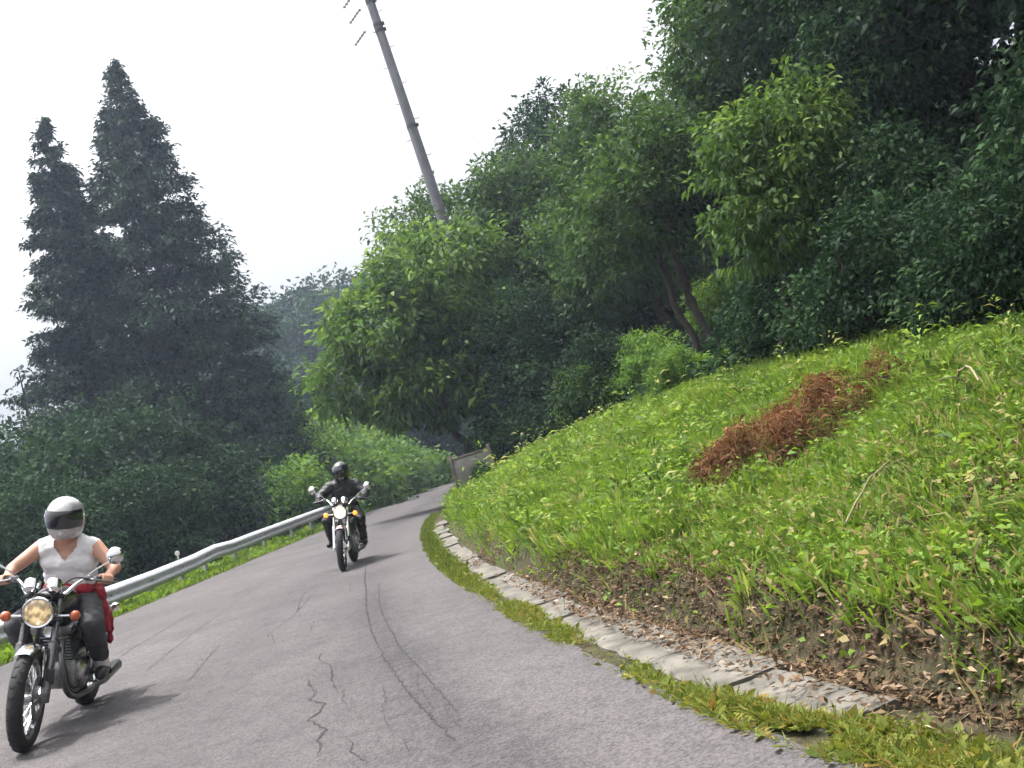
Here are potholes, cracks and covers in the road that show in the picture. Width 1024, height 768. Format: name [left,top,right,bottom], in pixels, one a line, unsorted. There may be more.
crack [118,593,249,681]
crack [349,566,464,751]
crack [307,654,348,758]
